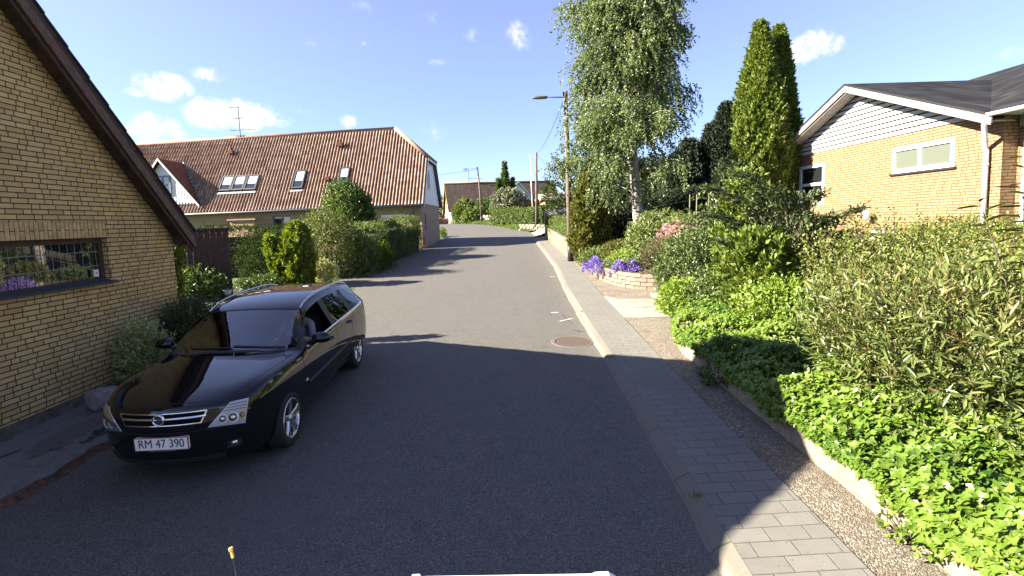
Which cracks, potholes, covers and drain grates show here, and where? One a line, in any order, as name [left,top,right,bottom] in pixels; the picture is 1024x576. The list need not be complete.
manhole cover [551,336,594,348]
